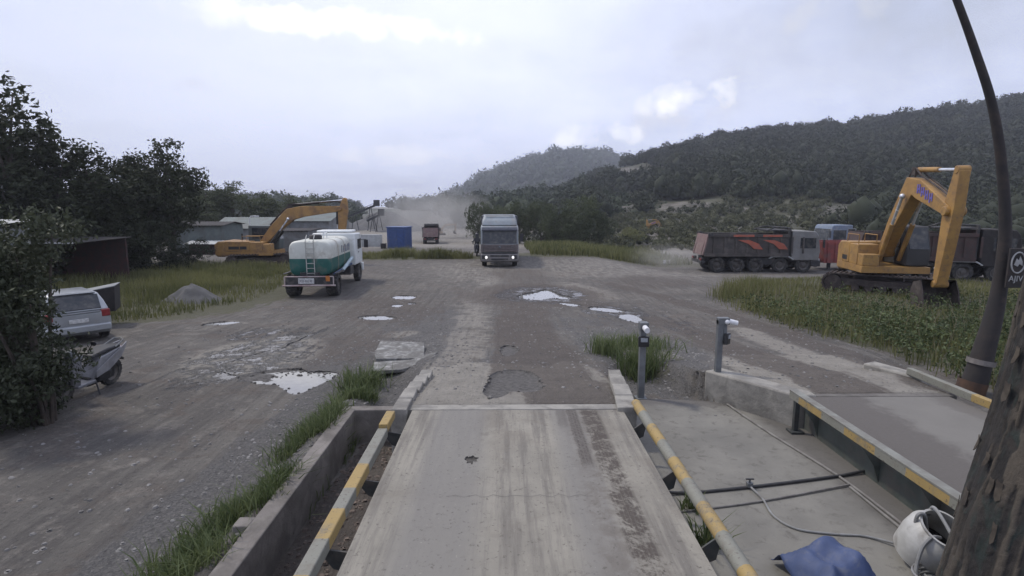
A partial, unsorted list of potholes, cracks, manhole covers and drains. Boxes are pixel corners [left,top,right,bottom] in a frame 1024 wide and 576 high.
pothole [237,367,339,395]
crack [218,336,307,376]
pothole [617,314,646,323]
pothole [517,289,571,300]
pothole [482,369,545,399]
pothole [499,344,520,356]
